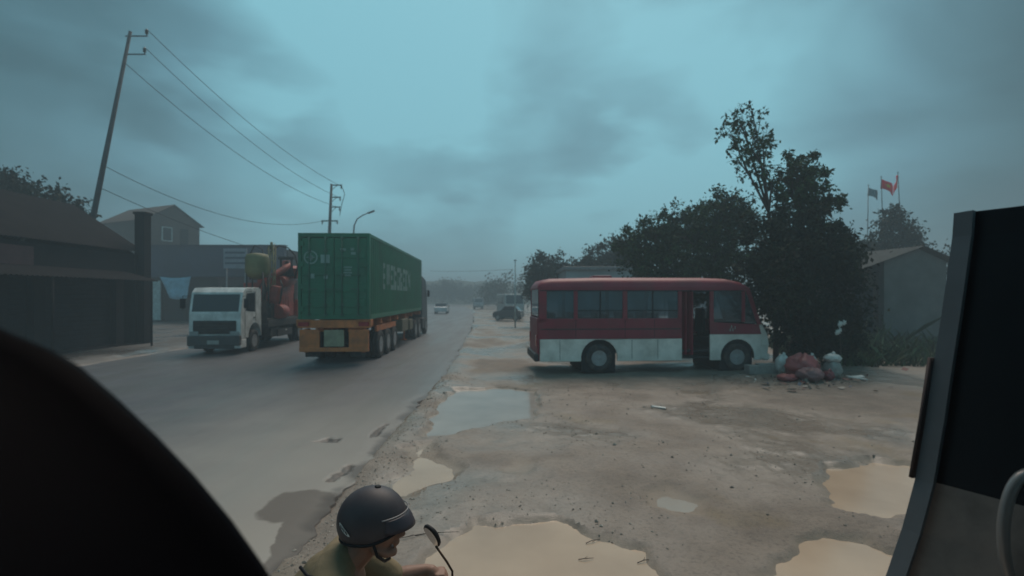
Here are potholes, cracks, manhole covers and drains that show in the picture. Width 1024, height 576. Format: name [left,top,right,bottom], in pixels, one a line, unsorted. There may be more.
pothole [807,455,915,518]
pothole [402,508,672,576]
pothole [414,385,545,438]
pothole [369,438,470,500]
pothole [733,527,897,576]
pothole [321,463,357,484]
pothole [366,423,391,438]
